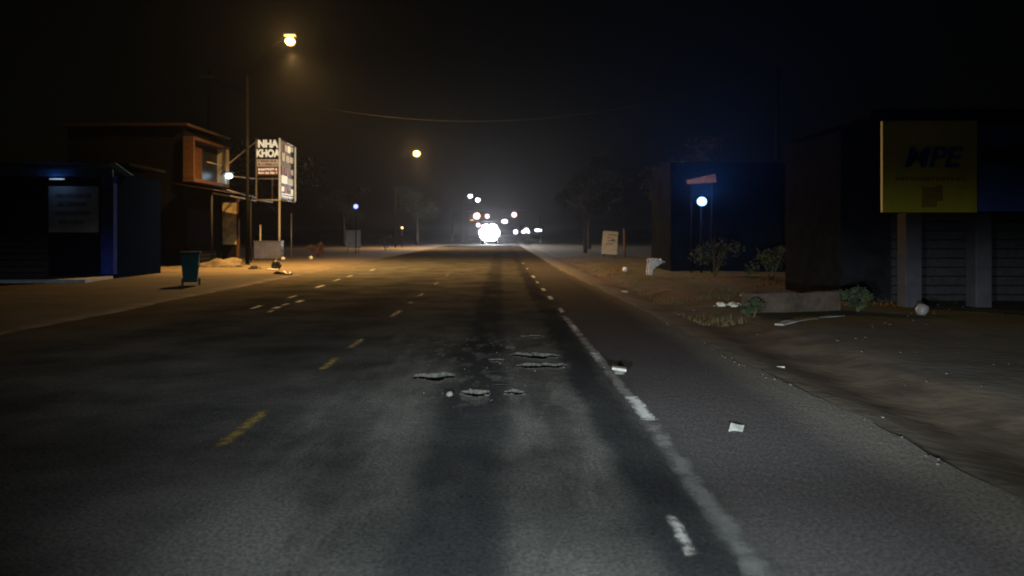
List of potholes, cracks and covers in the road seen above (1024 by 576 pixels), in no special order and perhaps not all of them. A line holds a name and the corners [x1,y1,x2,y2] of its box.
pothole [412,371,456,384]
pothole [515,362,568,371]
pothole [508,352,560,362]
pothole [460,388,491,400]
pothole [503,388,526,397]
